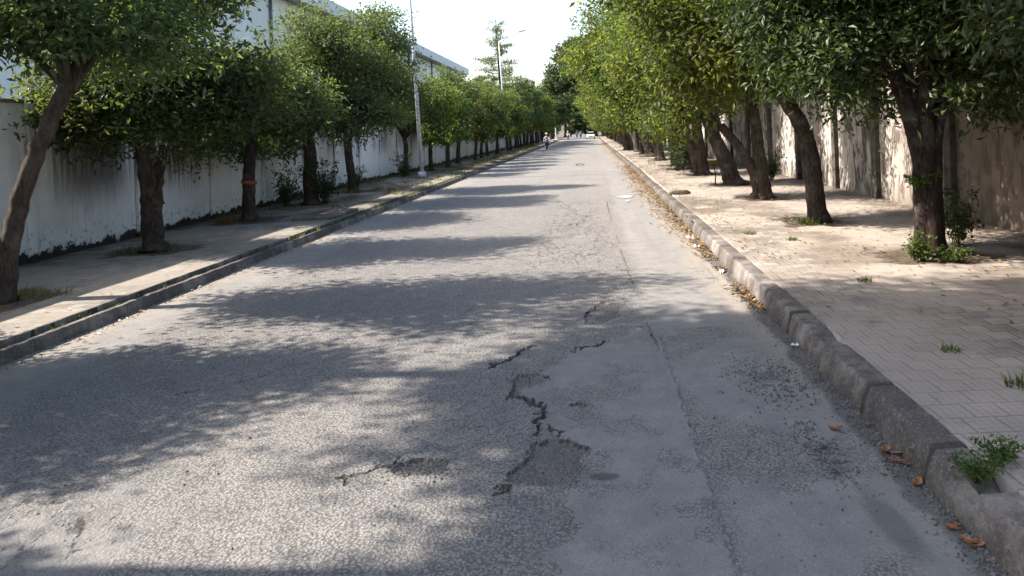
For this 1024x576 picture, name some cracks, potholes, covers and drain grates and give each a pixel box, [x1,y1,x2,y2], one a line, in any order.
crack [570,340,606,353]
crack [335,455,403,487]
pothole [505,437,591,486]
pothole [583,301,621,324]
crack [506,394,568,437]
pothole [389,457,450,478]
crack [488,345,537,369]
